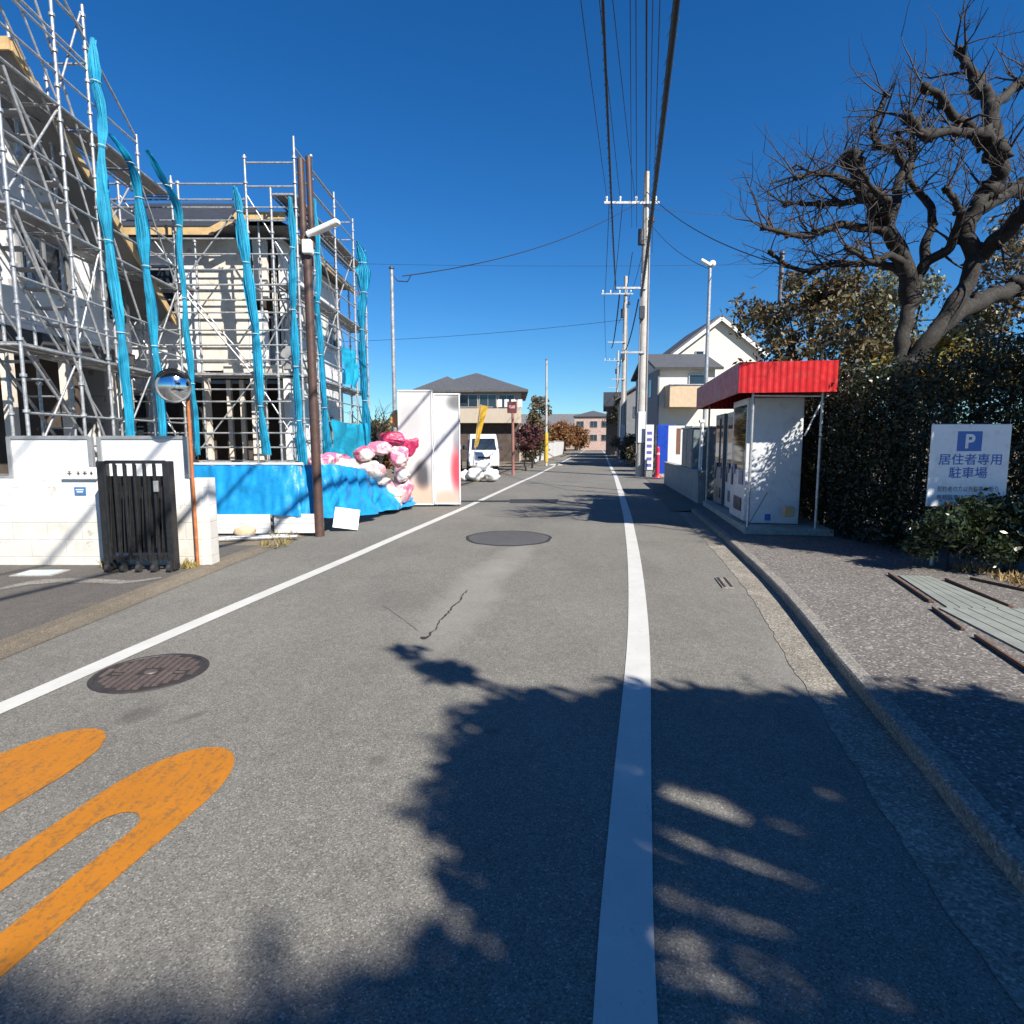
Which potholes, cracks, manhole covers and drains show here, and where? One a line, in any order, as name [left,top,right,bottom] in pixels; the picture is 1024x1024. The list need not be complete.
crack [383,591,467,639]
drain grate [715,577,735,589]
manhole cover [87,653,210,694]
